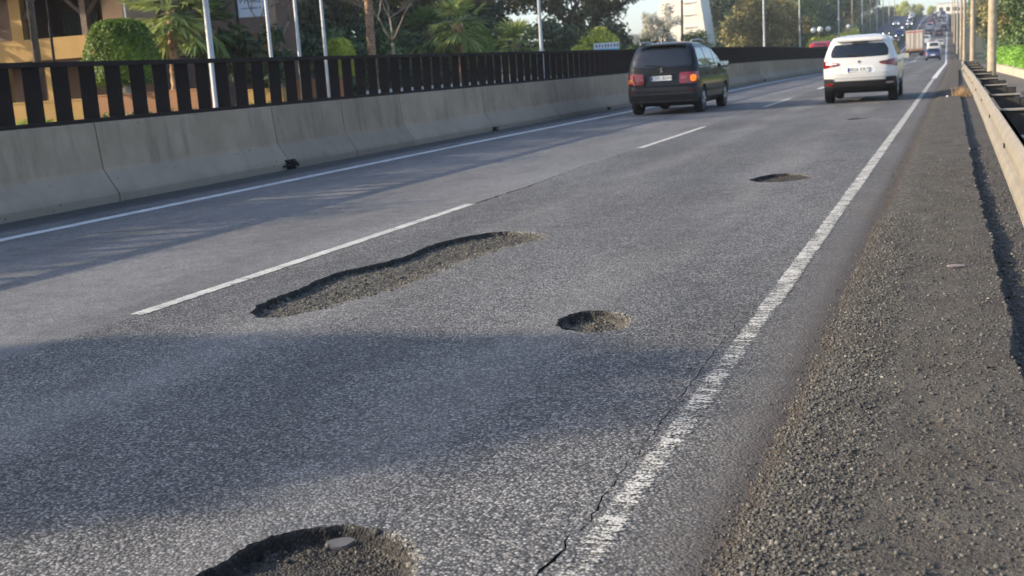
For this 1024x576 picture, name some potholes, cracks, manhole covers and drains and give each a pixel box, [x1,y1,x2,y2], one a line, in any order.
pothole [555,310,635,333]
pothole [196,524,425,576]
crack [535,288,769,576]
pothole [750,173,813,182]
pothole [250,231,551,318]
